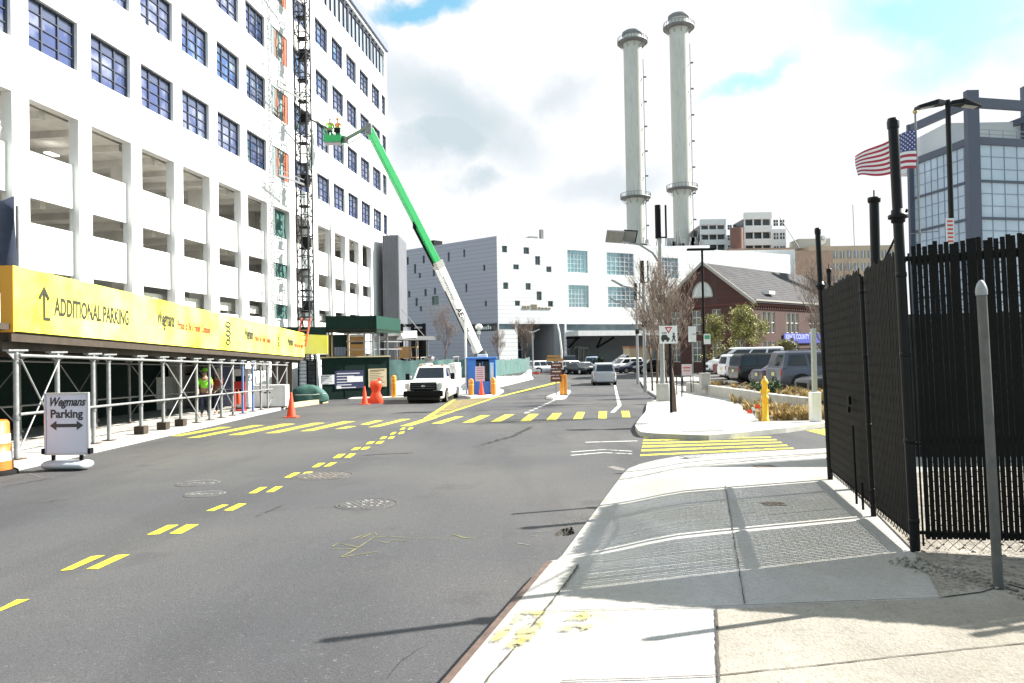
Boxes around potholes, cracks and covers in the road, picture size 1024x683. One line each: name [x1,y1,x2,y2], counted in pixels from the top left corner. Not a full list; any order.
pothole [554,527,575,536]
manhole cover [334,498,399,510]
manhole cover [291,471,355,480]
crack [479,426,532,446]
